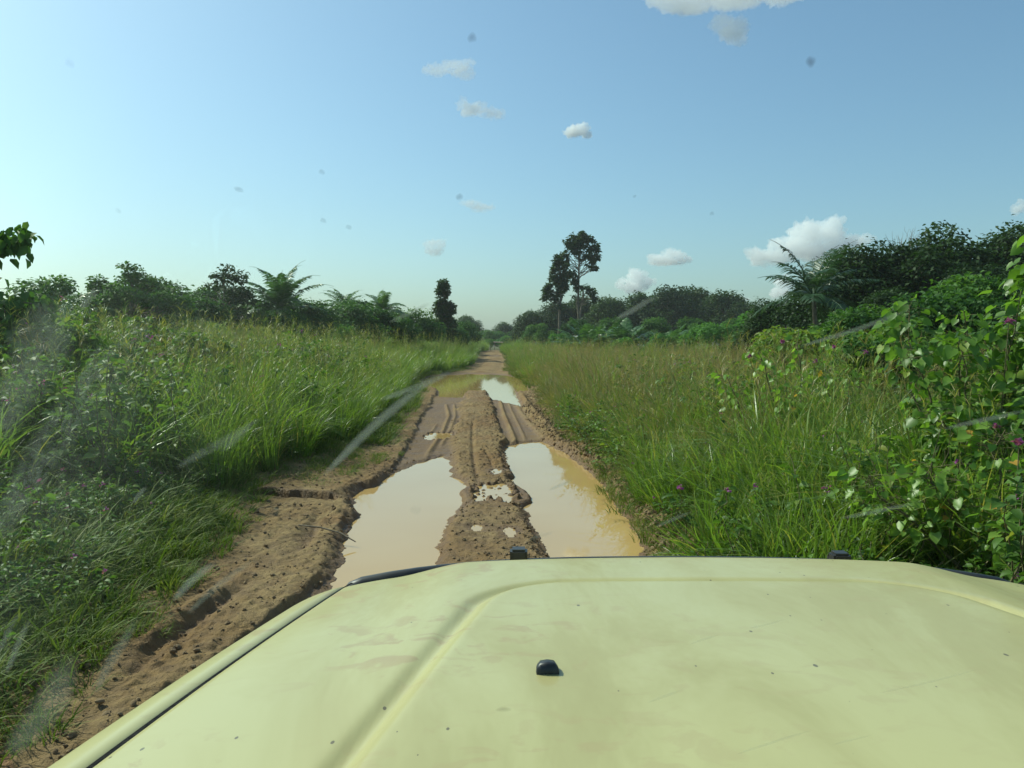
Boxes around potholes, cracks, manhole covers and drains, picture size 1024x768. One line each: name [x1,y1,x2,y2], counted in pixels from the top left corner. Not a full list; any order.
pothole [496,436,663,558]
pothole [307,454,477,599]
pothole [466,480,526,503]
pothole [420,431,456,440]
pothole [419,374,534,407]
